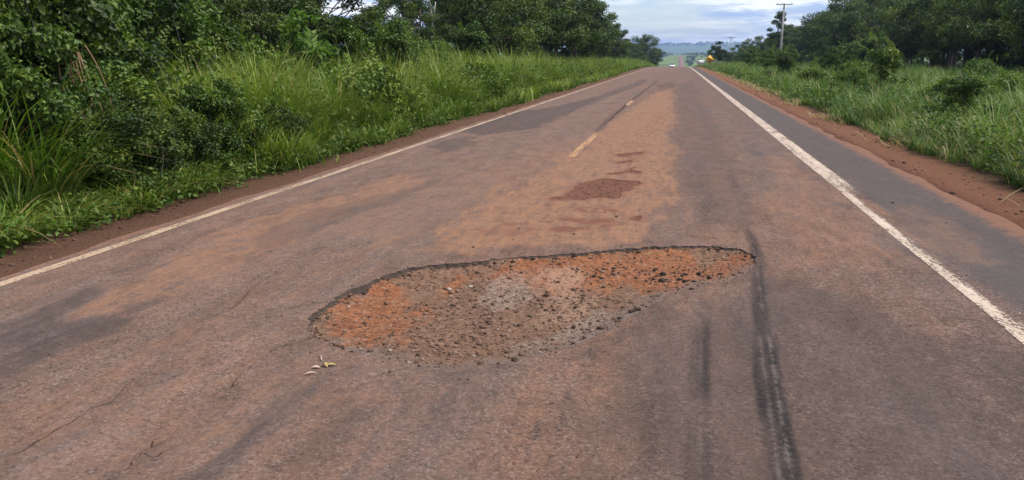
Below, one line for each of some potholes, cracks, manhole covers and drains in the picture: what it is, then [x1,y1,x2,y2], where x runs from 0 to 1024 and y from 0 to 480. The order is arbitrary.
pothole [307,245,757,371]
crack [10,379,136,456]
crack [131,436,173,466]
pothole [550,179,641,200]
